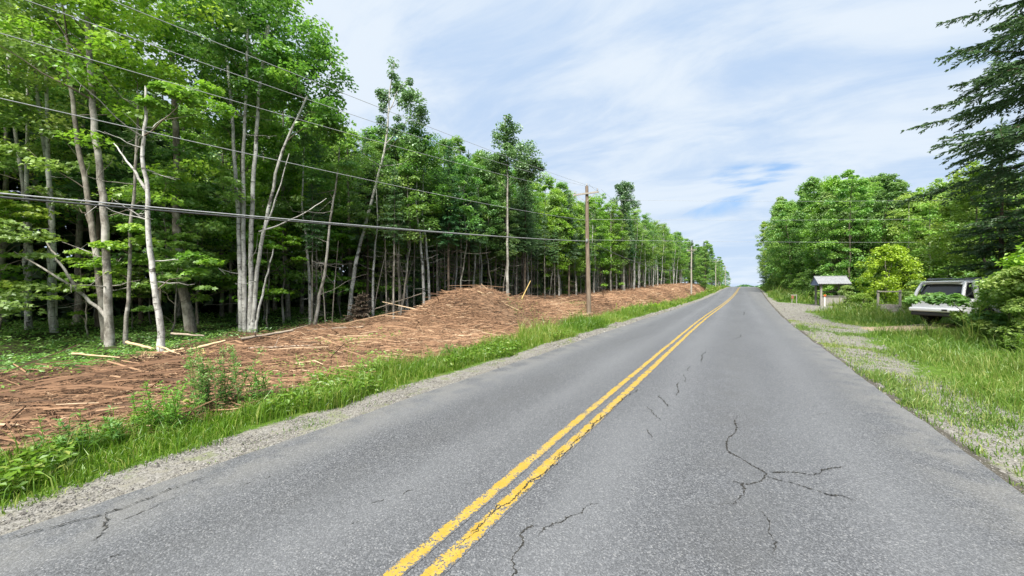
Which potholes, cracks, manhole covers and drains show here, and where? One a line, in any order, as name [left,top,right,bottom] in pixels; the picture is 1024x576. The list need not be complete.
crack [717,415,853,505]
crack [9,477,204,541]
crack [511,503,597,576]
